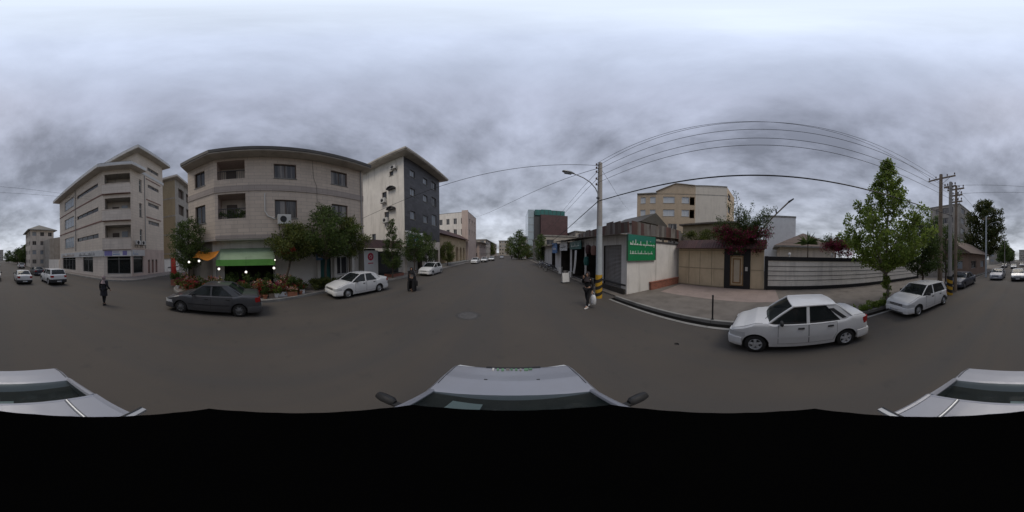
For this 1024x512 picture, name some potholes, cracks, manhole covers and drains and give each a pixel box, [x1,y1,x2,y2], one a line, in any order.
manhole cover [455,311,481,320]
